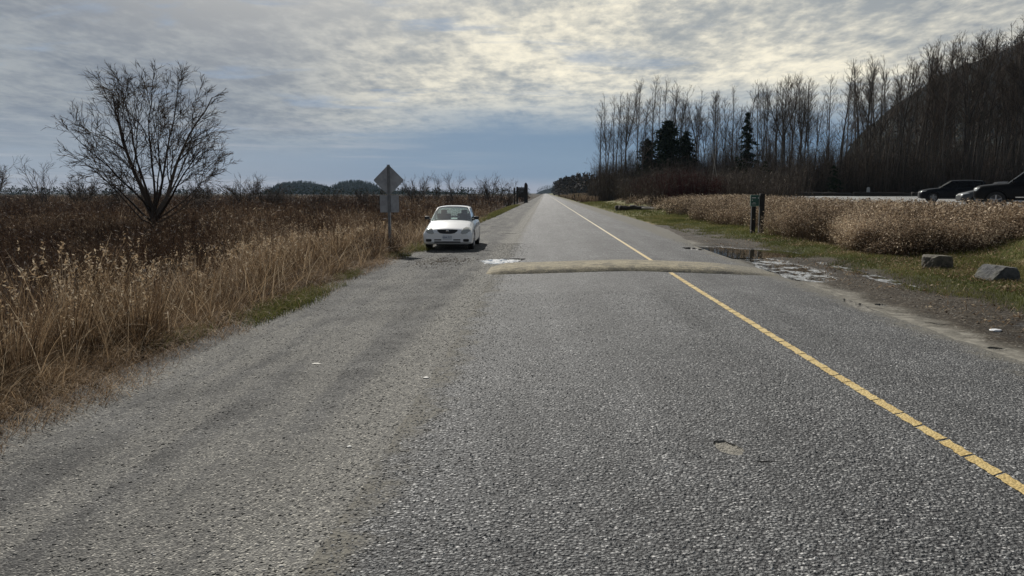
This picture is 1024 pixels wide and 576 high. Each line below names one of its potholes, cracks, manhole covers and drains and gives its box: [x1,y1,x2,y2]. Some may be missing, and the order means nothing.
pothole [713,440,745,455]
